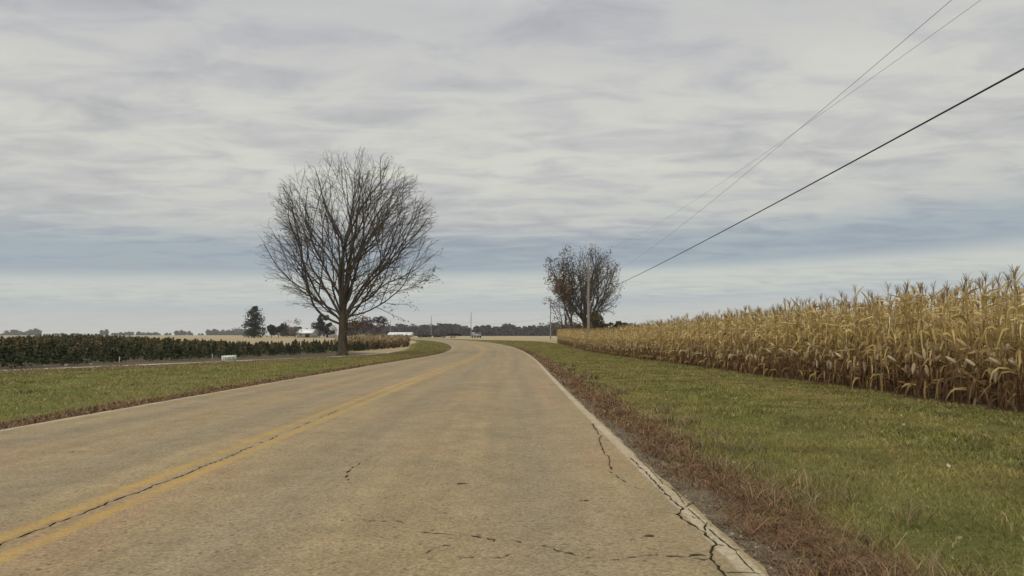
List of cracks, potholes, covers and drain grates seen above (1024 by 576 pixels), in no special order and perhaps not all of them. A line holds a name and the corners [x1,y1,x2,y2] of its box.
crack [423,424,761,576]
